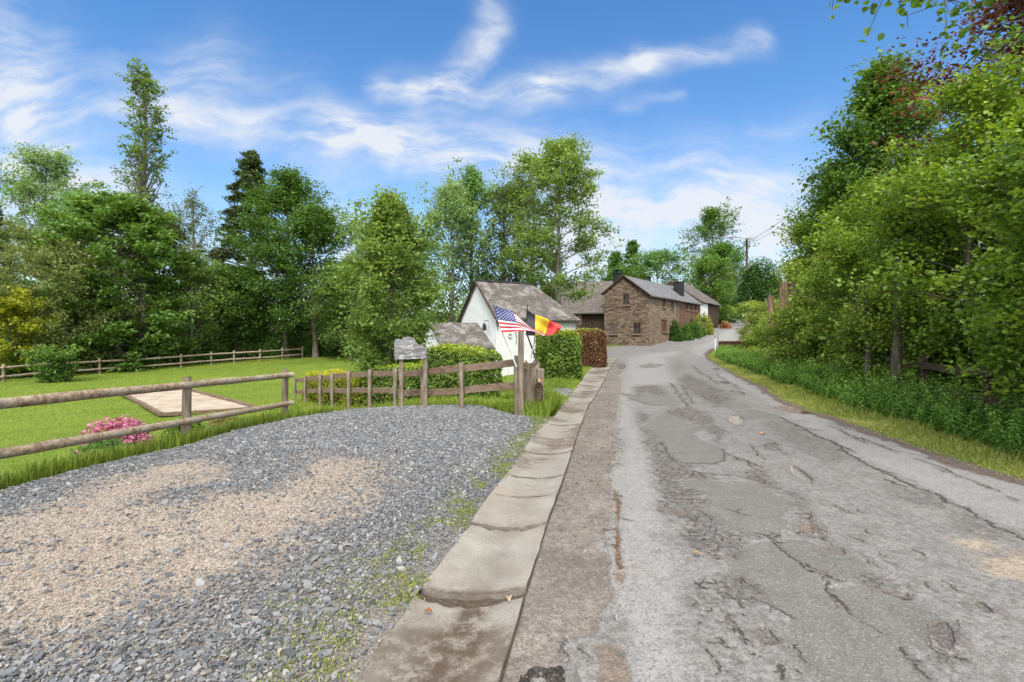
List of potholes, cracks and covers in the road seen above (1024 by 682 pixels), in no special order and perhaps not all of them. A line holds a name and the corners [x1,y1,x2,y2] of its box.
pothole [724,415,748,426]
crack [603,490,635,569]
crack [625,365,976,679]
pothole [740,618,794,655]
pothole [911,613,975,657]
crack [780,417,1024,540]
pothole [784,464,817,485]
pothole [789,518,831,537]
